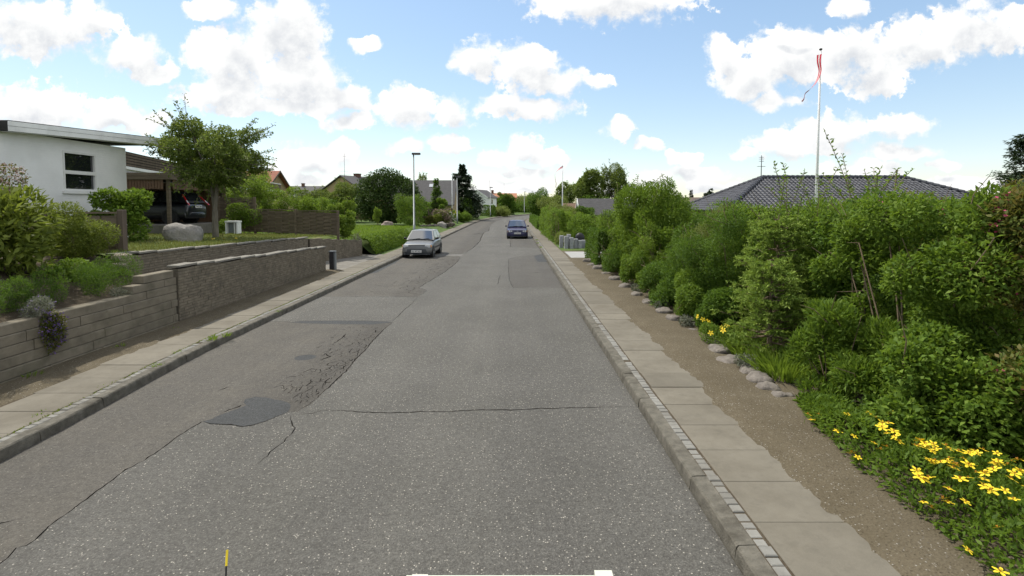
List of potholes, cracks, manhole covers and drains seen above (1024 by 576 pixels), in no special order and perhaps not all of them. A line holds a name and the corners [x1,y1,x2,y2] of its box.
crack [206,327,632,459]
